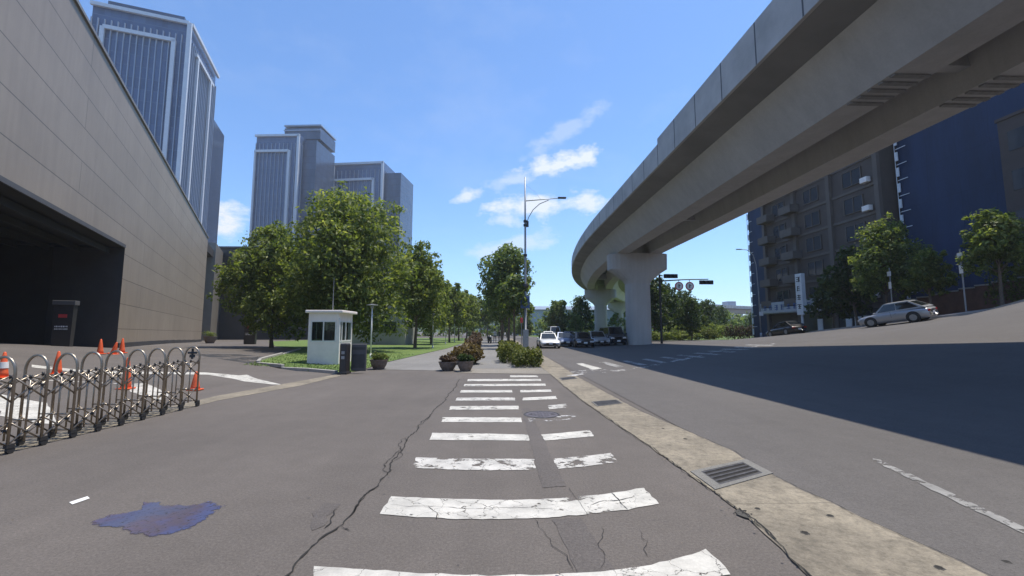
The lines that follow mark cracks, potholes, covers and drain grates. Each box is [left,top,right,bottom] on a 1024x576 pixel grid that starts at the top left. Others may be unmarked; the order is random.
drain grate [591,399,622,407]
crack [285,379,460,576]
drain grate [690,459,773,490]
